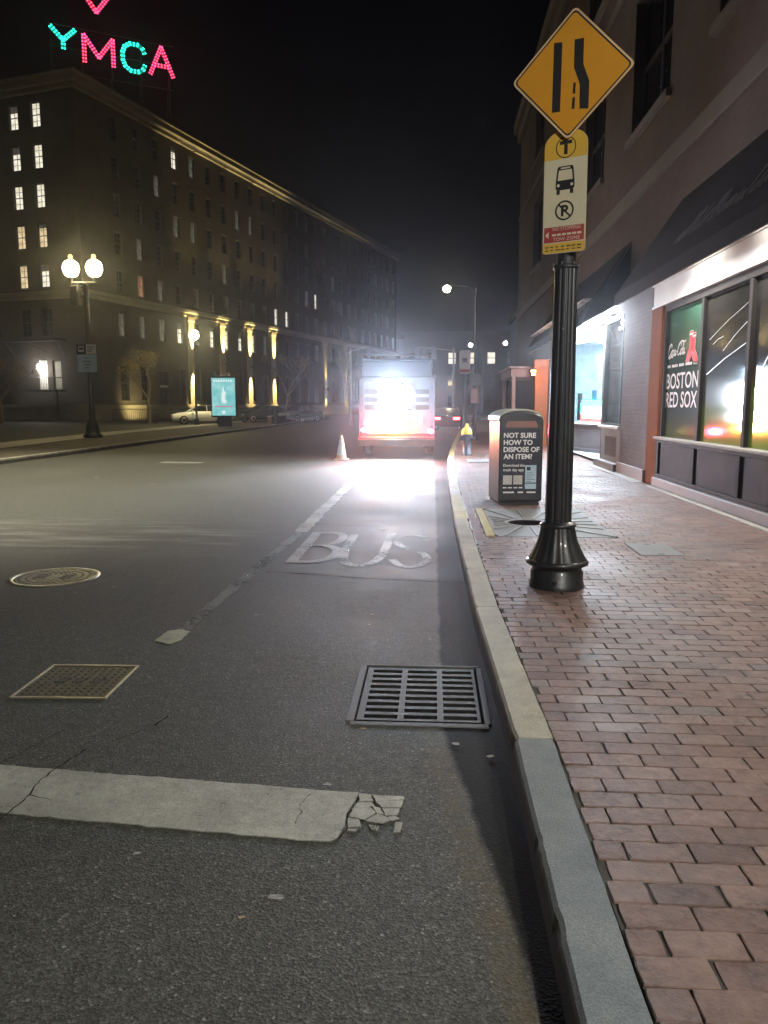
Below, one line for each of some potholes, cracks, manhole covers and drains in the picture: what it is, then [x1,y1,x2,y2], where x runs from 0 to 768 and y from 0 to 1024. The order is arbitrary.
utility cover [625,543,685,556]
manhole cover [9,664,139,699]
drain grate [345,664,491,729]
manhole cover [9,568,100,587]
crack [339,795,401,839]
crack [0,749,86,820]
